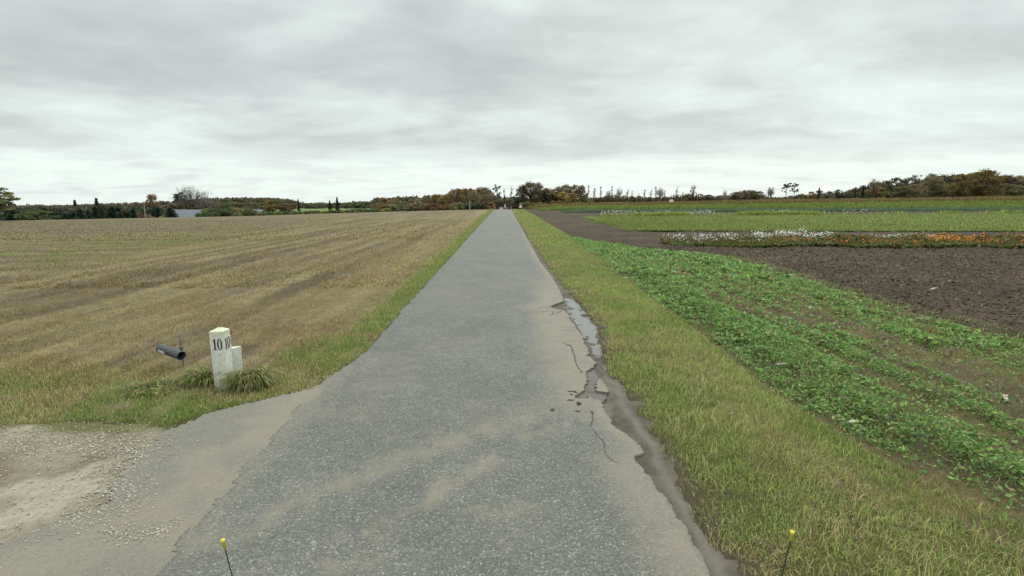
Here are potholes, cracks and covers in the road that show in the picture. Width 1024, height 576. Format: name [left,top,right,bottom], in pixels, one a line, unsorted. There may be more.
pothole [574,368,608,403]
crack [540,307,582,373]
crack [590,411,618,463]
